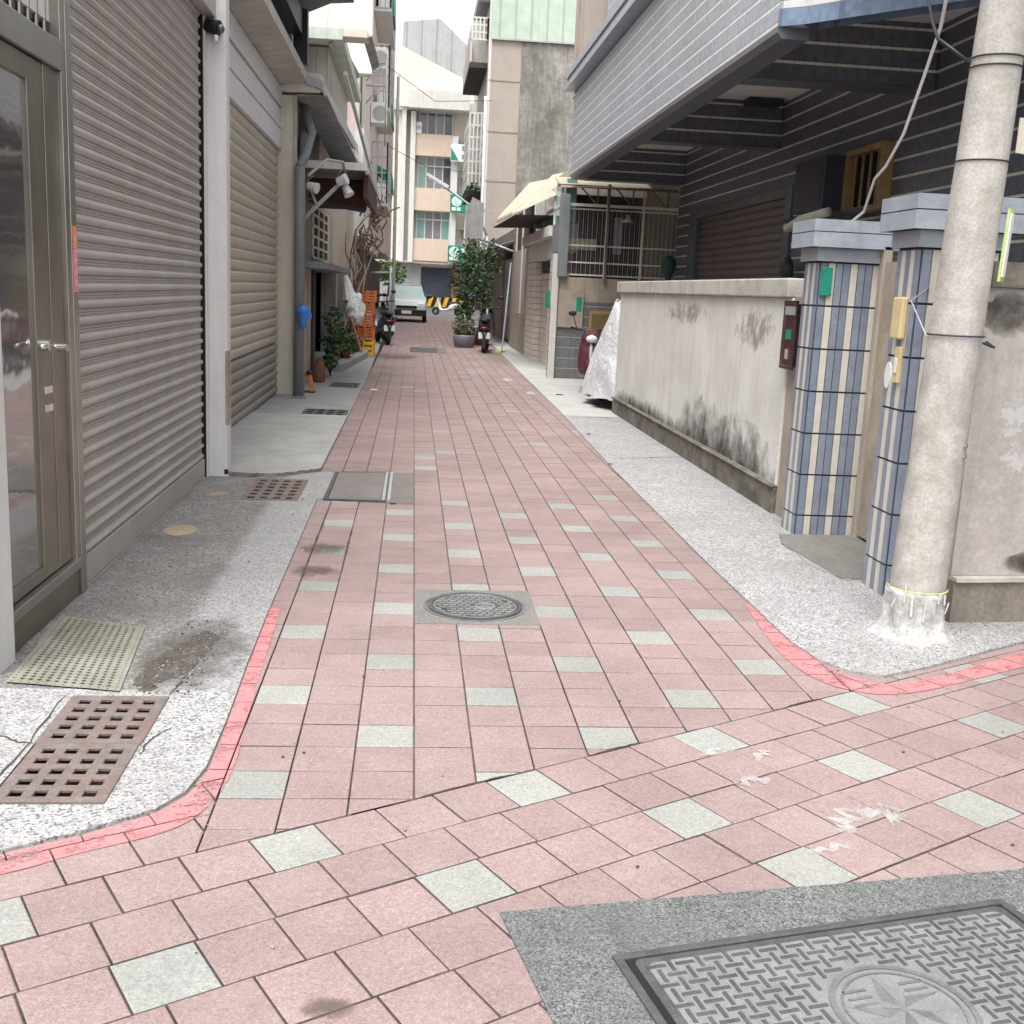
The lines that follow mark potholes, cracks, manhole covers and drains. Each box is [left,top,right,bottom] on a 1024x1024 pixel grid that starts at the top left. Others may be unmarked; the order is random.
drain grate [0,743,139,805]
drain grate [34,695,169,745]
manhole cover [612,898,1024,1024]
manhole cover [423,592,526,622]
crack [0,695,66,776]
crack [140,727,174,755]
drain grate [240,478,309,501]
utility cover [323,471,414,505]
